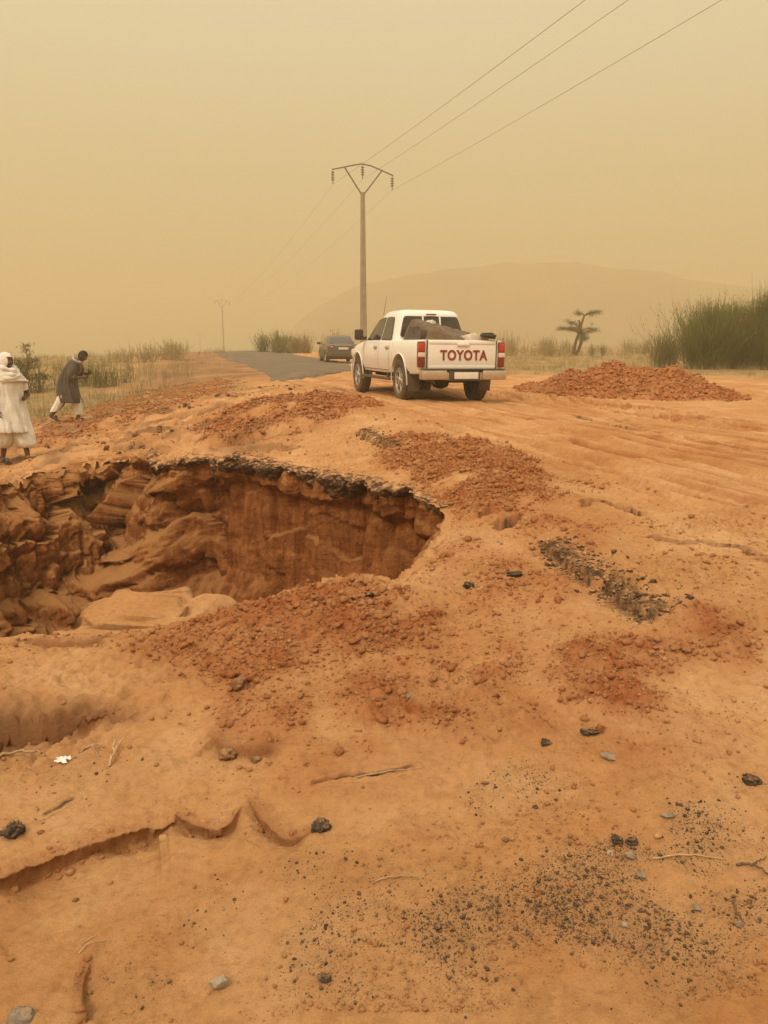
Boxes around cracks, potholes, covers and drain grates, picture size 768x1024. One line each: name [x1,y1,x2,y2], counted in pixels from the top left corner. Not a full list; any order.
pothole [0,663,197,767]
crack [0,793,205,919]
pothole [0,451,509,641]
crack [299,761,425,793]
